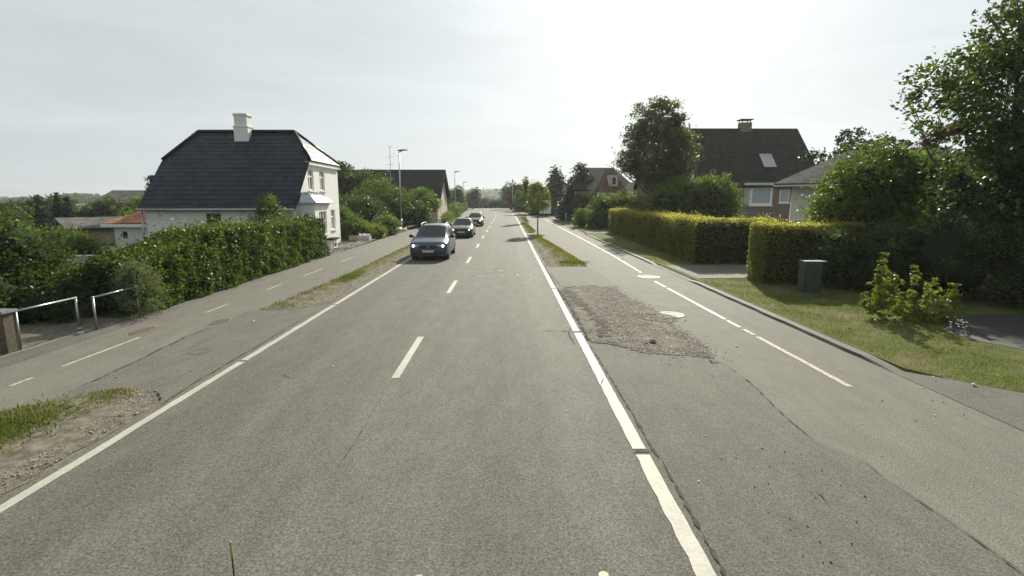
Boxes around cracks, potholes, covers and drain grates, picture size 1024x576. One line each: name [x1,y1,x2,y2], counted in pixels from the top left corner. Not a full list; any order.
pothole [560,283,743,364]
